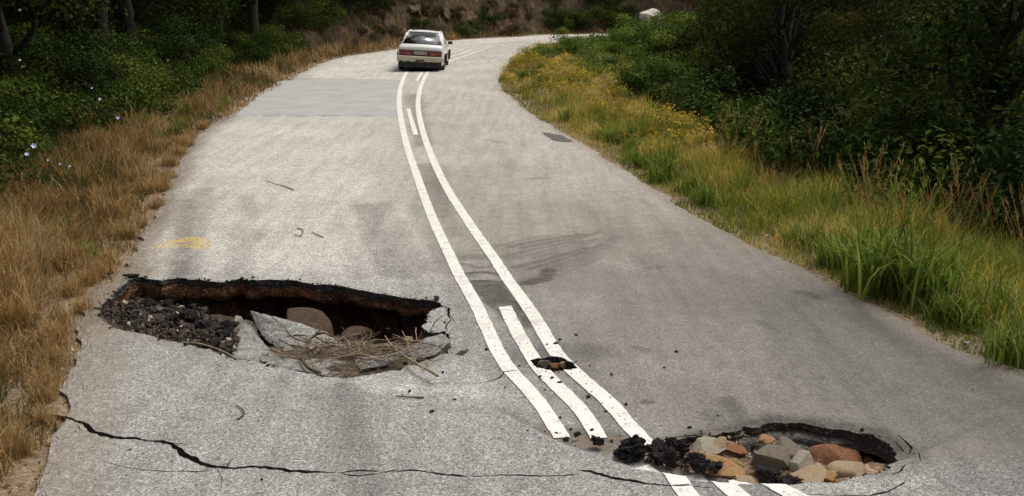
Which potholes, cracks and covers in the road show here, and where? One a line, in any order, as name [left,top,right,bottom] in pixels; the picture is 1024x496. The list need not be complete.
pothole [531,356,581,373]
pothole [643,421,898,483]
crack [55,415,709,488]
pothole [93,275,468,378]
